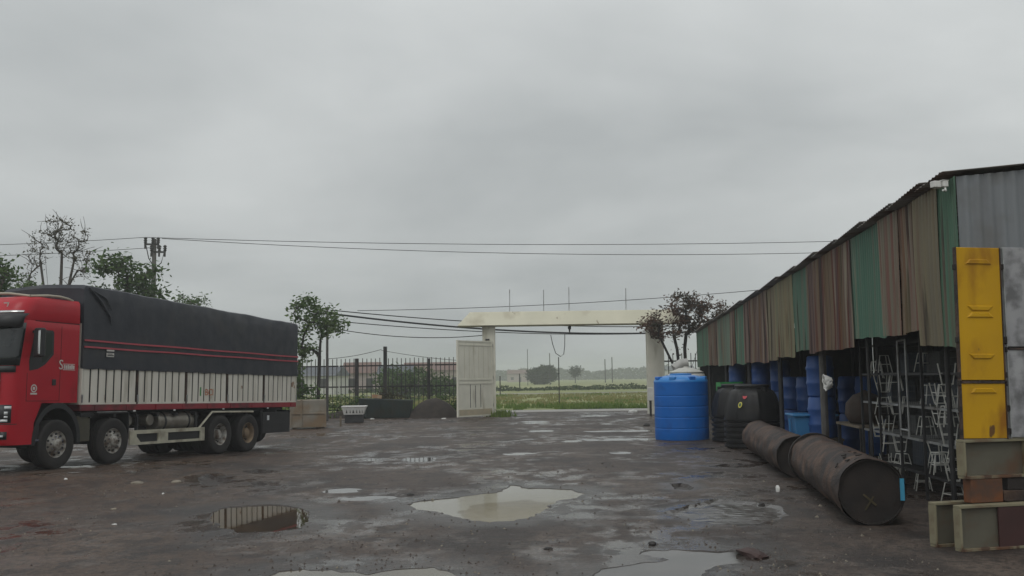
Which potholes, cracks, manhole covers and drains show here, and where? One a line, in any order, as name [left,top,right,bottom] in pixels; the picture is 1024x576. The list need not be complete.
pothole [407,485,585,522]
pothole [209,504,310,533]
pothole [592,549,747,576]
